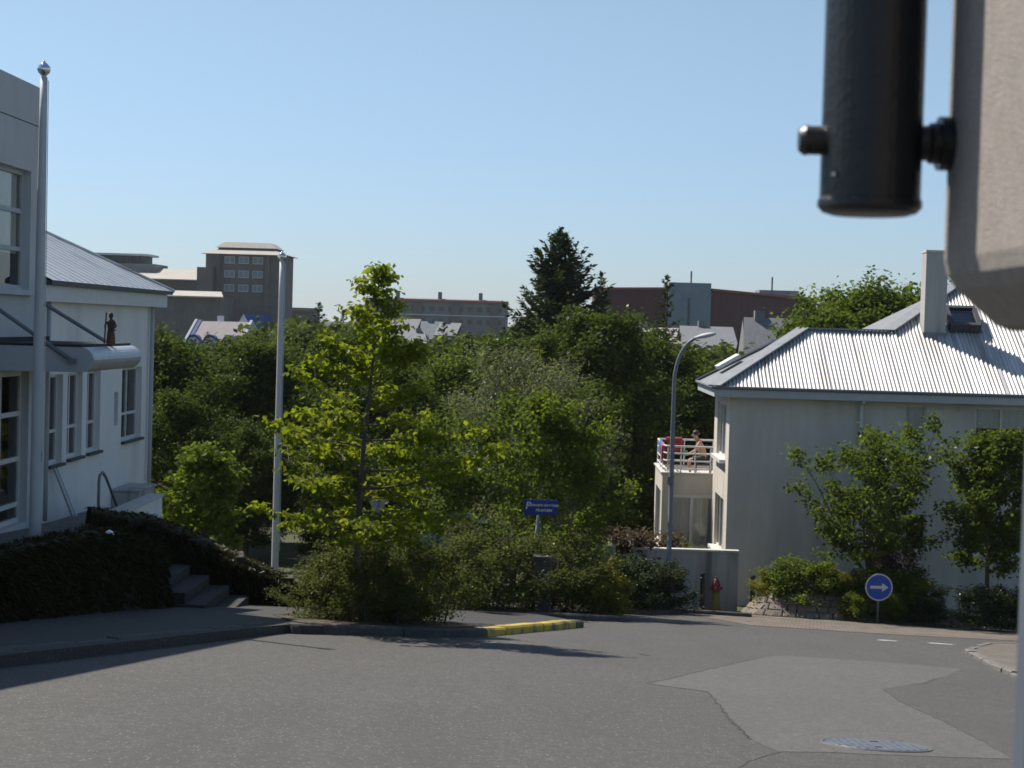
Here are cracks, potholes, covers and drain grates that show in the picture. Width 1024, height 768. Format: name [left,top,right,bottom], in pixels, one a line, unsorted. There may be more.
manhole cover [819,738,933,753]
